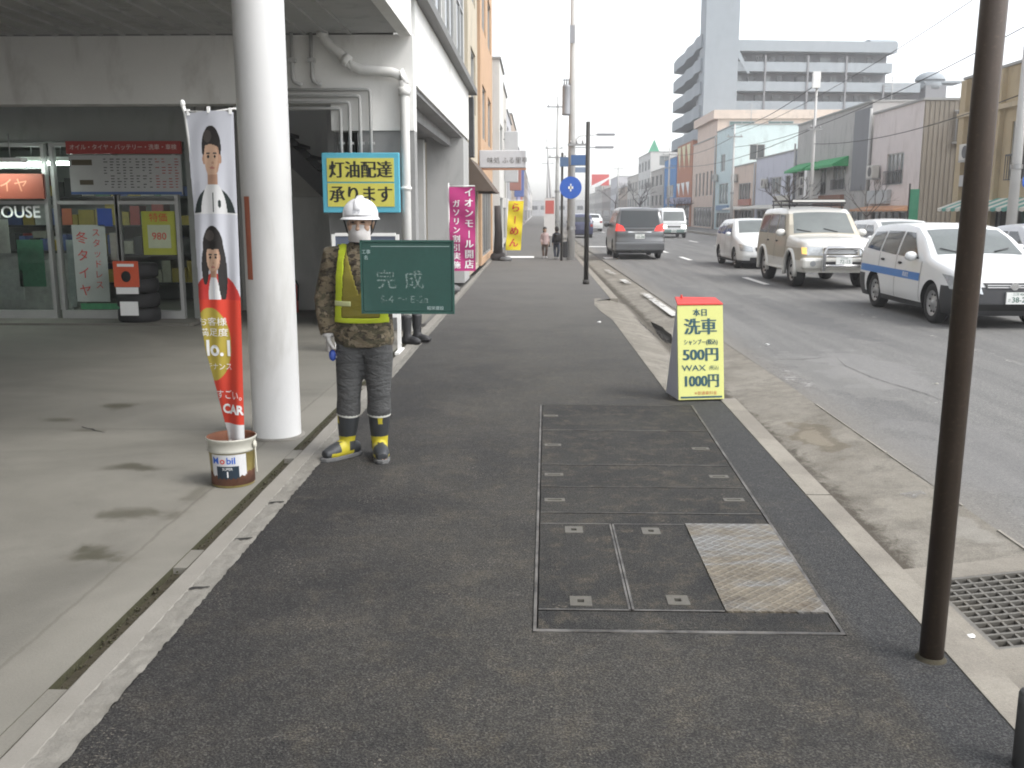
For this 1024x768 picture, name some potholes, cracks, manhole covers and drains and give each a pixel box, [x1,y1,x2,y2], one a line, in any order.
manhole cover [685,523,828,614]
drain grate [949,570,1024,650]
manhole cover [540,487,762,515]
manhole cover [541,465,745,489]
manhole cover [539,523,631,612]
manhole cover [540,513,768,526]
manhole cover [612,523,725,613]
manhole cover [542,405,707,432]
manhole cover [538,611,839,632]
manhole cover [541,431,730,466]
